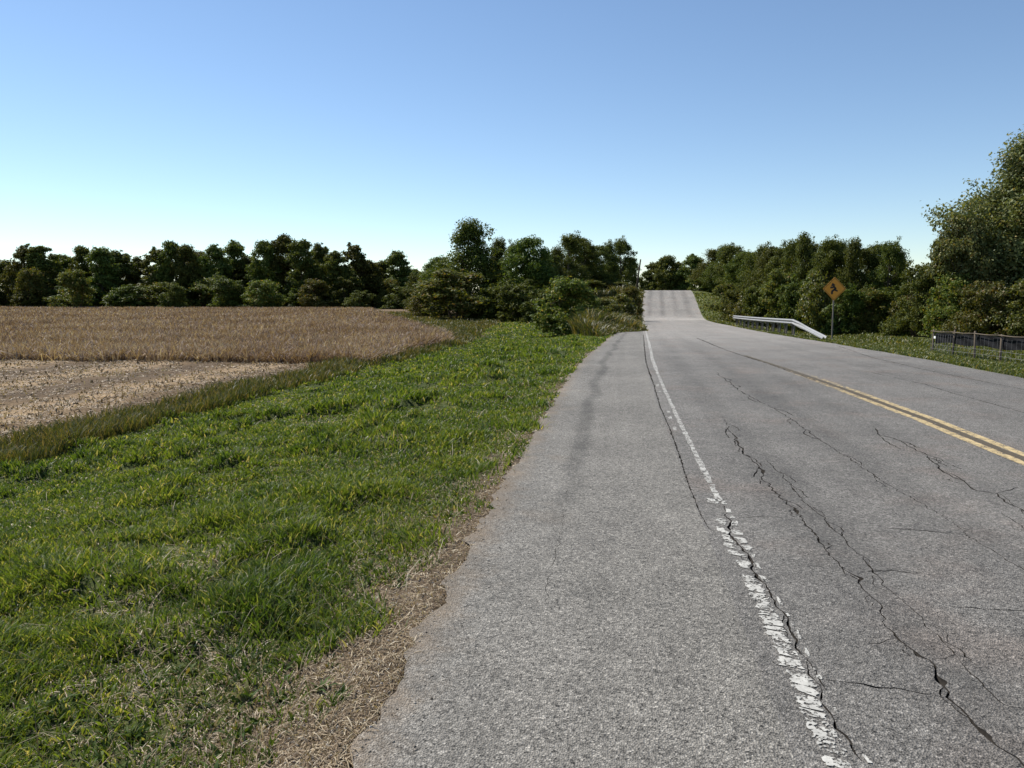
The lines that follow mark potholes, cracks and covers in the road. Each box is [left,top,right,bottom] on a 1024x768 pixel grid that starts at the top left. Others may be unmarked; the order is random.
crack [716,371,1024,570]
crack [721,417,1024,767]
